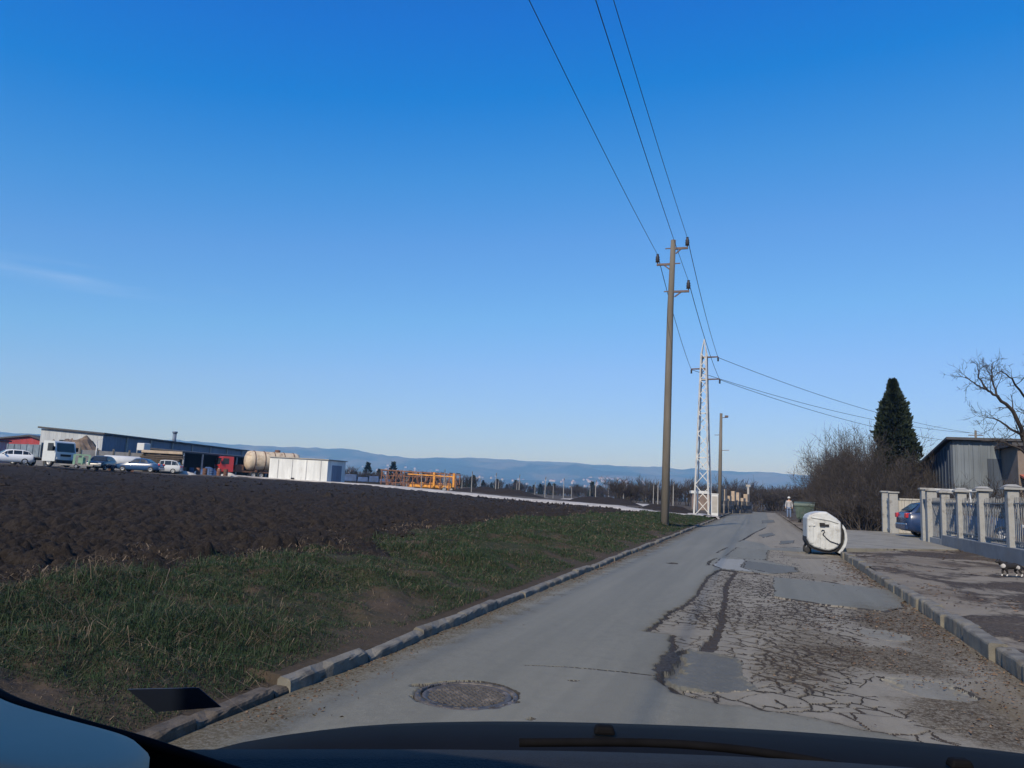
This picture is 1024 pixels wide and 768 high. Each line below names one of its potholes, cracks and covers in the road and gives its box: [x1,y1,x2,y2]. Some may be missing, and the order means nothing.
crack [646,527,962,746]
manhole cover [411,680,520,710]
